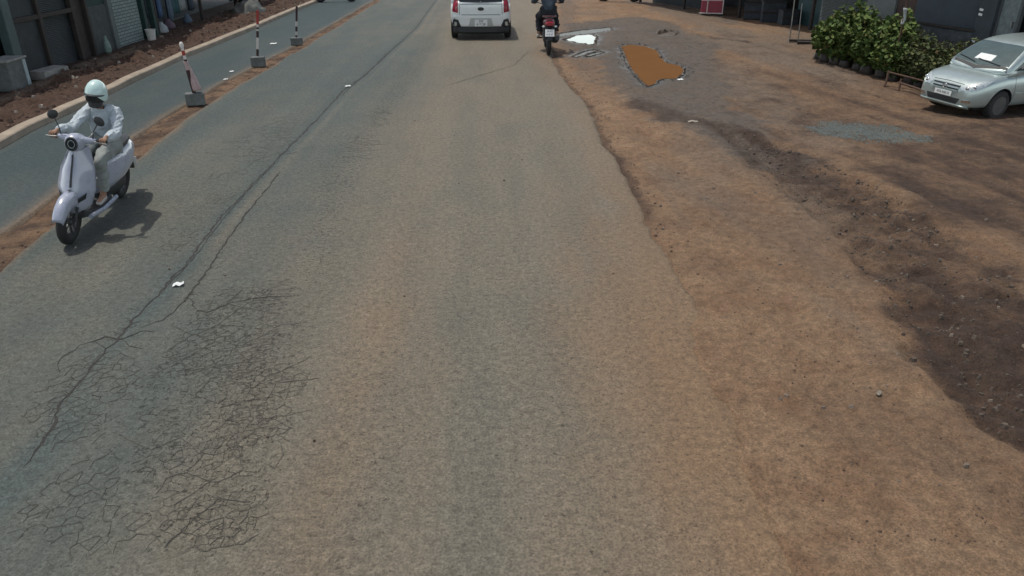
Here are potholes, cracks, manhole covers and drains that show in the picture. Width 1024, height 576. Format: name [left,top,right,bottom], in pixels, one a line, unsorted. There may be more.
crack [6,2,435,566]
pothole [619,45,685,87]
pothole [564,34,599,45]
